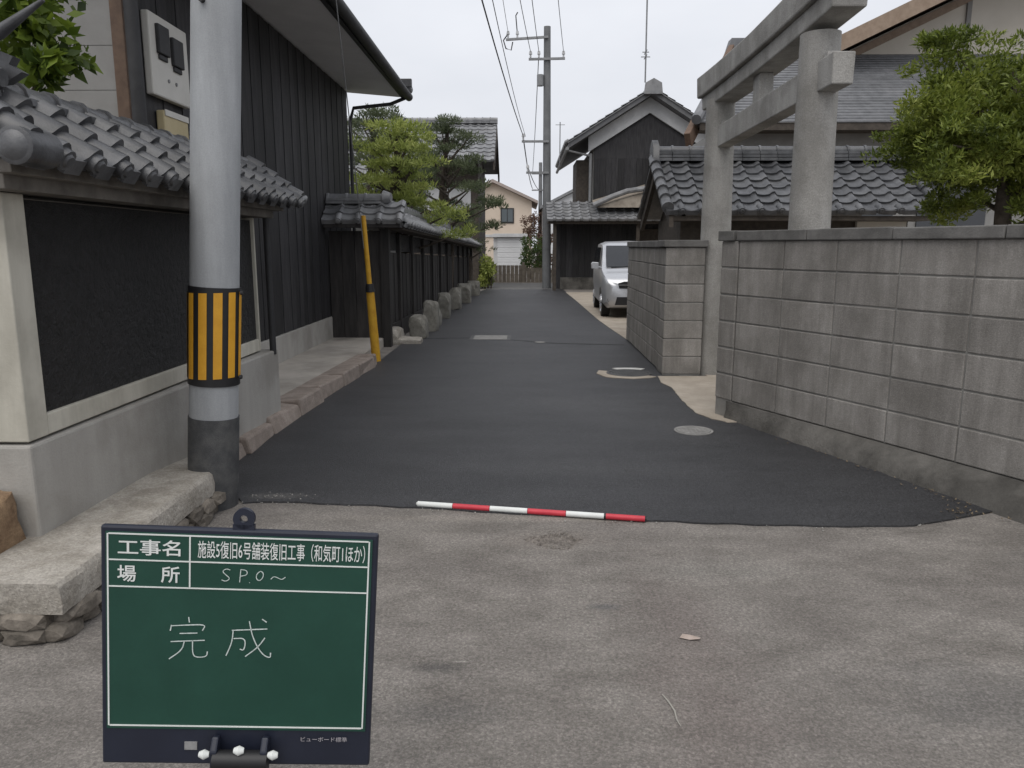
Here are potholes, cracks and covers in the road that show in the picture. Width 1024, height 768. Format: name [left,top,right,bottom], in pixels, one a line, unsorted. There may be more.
manhole cover [674,426,713,436]
manhole cover [596,368,656,379]
pothole [515,529,598,552]
